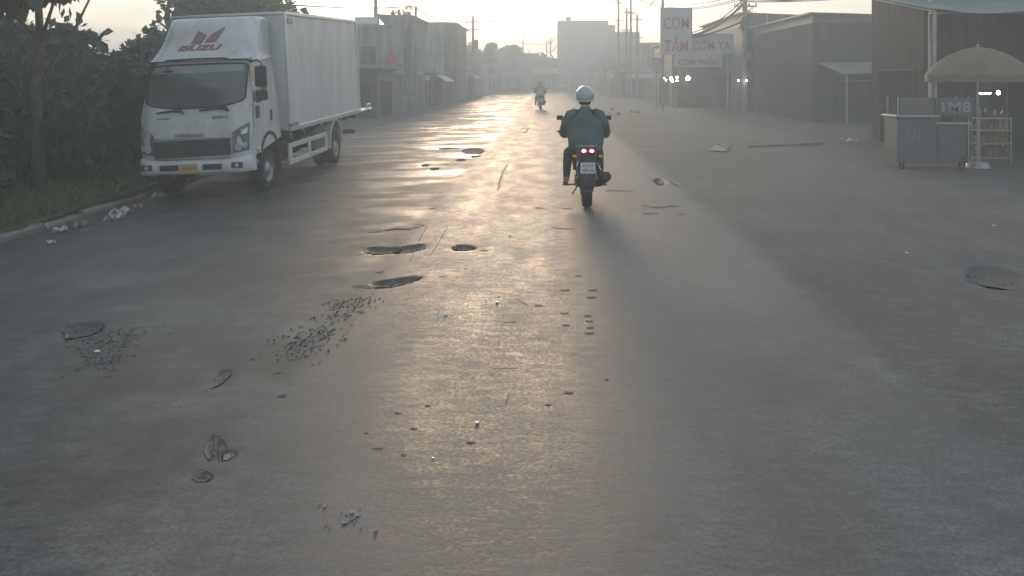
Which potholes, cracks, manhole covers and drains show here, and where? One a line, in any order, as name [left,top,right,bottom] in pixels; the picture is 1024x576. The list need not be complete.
pothole [218,450,238,462]
pothole [390,243,426,254]
pothole [62,323,105,340]
pothole [361,247,403,255]
pothole [209,368,232,388]
crack [497,165,507,190]
pothole [204,434,228,464]
pothole [371,277,422,288]
pothole [193,470,213,482]
